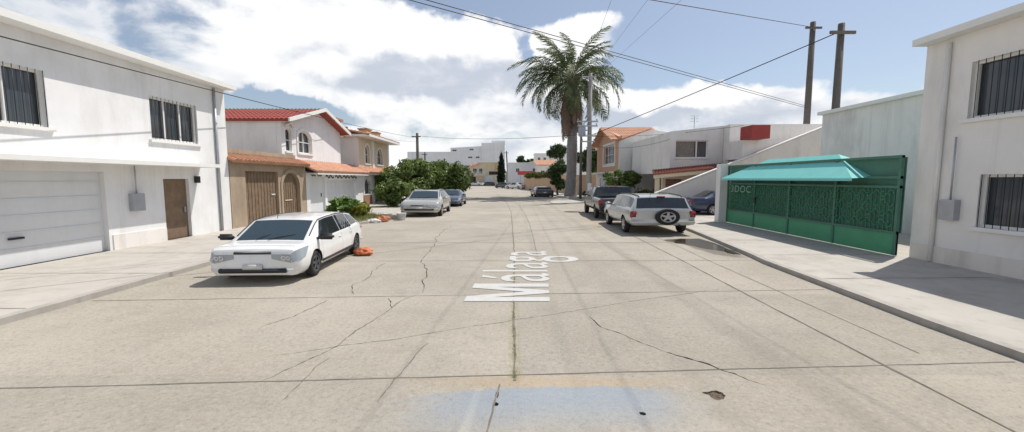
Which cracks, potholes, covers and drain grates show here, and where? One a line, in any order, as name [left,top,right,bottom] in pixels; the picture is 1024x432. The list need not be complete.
crack [262,228,717,404]
pothole [702,390,725,400]
crack [590,317,764,385]
